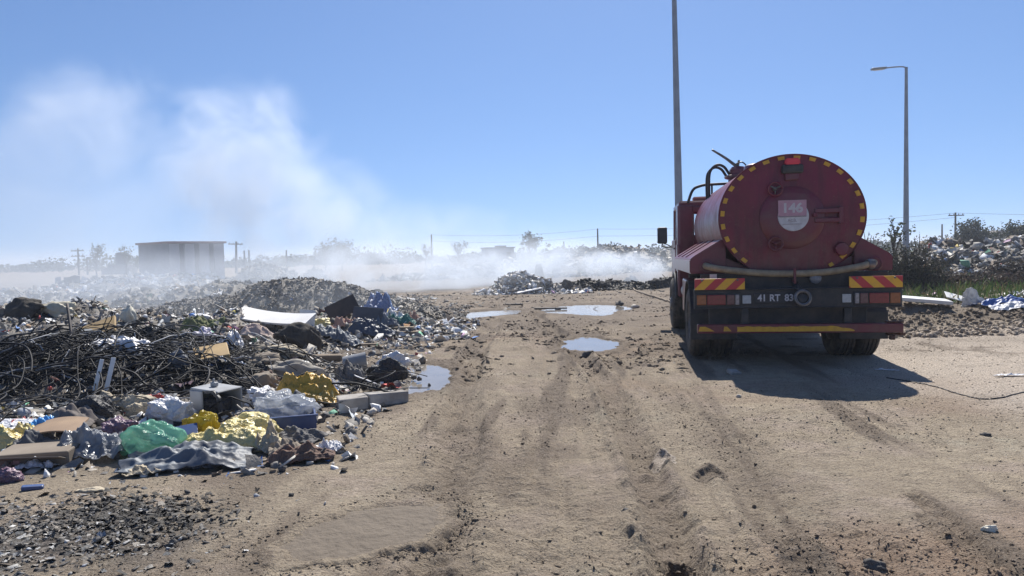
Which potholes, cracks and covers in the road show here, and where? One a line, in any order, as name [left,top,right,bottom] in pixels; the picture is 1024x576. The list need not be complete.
pothole [519,302,650,317]
pothole [449,308,544,320]
pothole [548,333,631,356]
